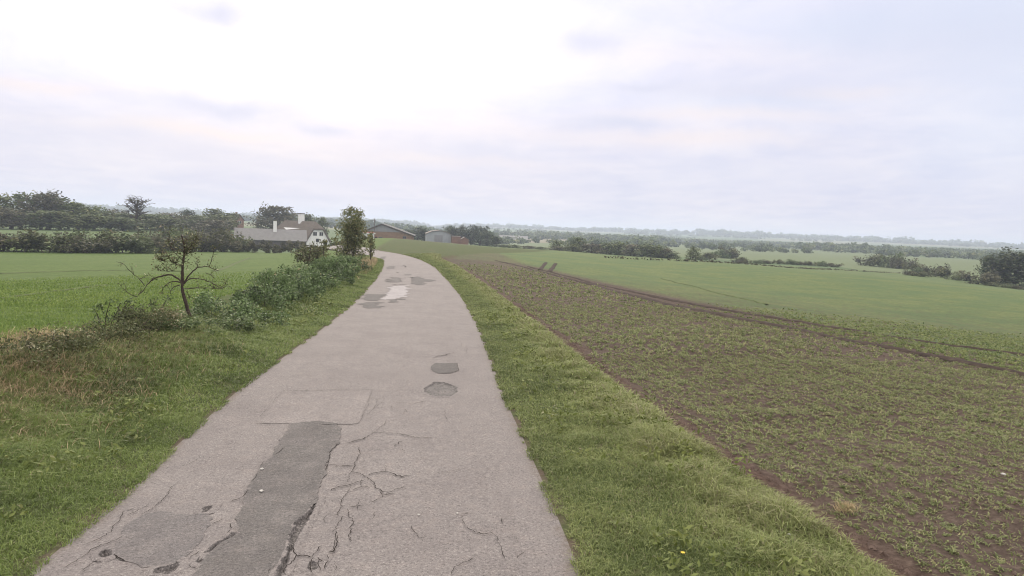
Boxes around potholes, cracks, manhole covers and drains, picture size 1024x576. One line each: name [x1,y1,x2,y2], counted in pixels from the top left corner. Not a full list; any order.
crack [283,401,427,575]
crack [67,483,178,570]
